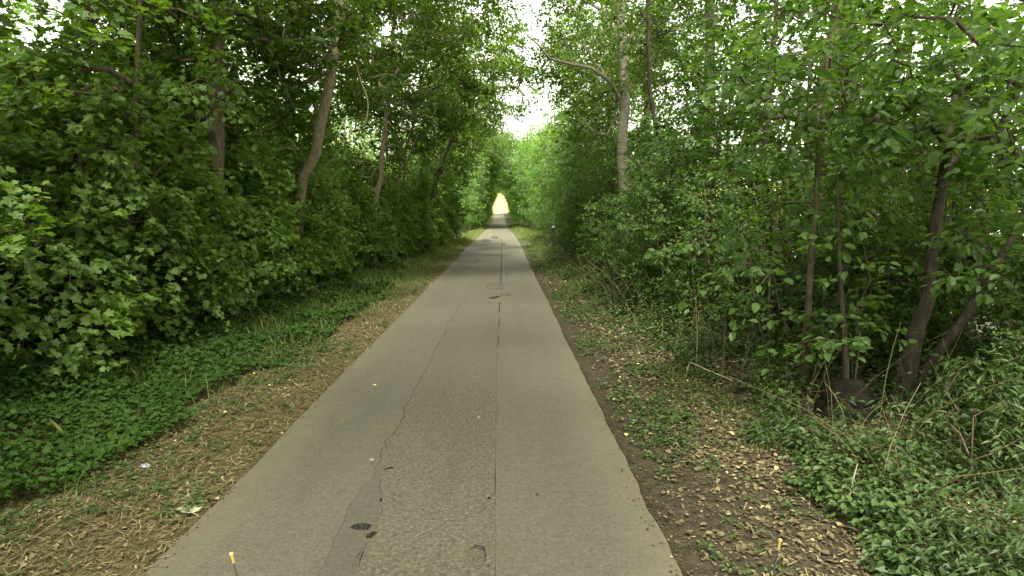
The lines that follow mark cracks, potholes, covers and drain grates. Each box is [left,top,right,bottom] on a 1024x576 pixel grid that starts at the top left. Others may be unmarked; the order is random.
pothole [465,544,486,570]
crack [309,305,460,572]
